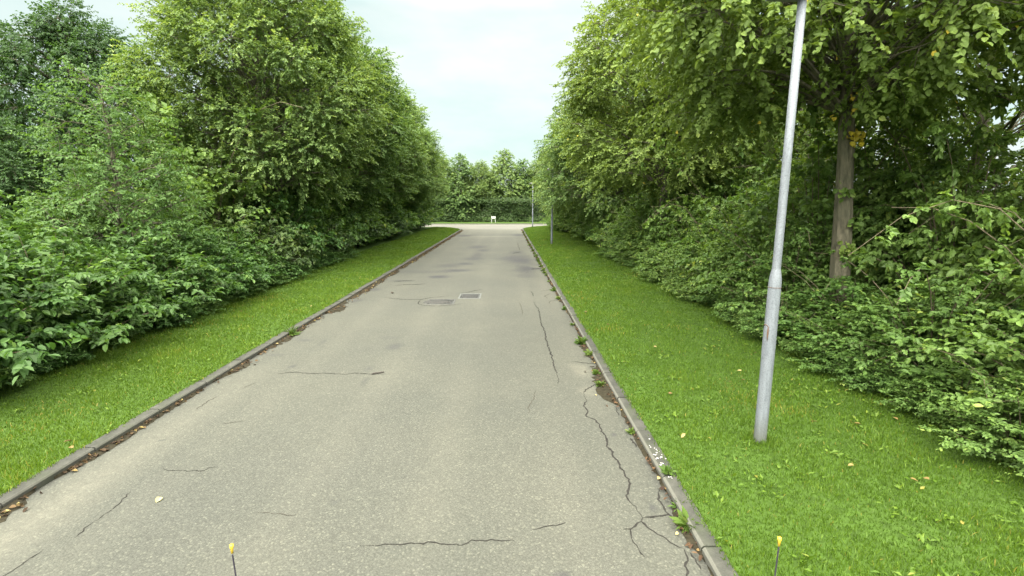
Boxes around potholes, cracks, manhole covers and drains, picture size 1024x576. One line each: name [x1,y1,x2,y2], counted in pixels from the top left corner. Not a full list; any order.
crack [519,290,590,383]
crack [583,384,701,576]
